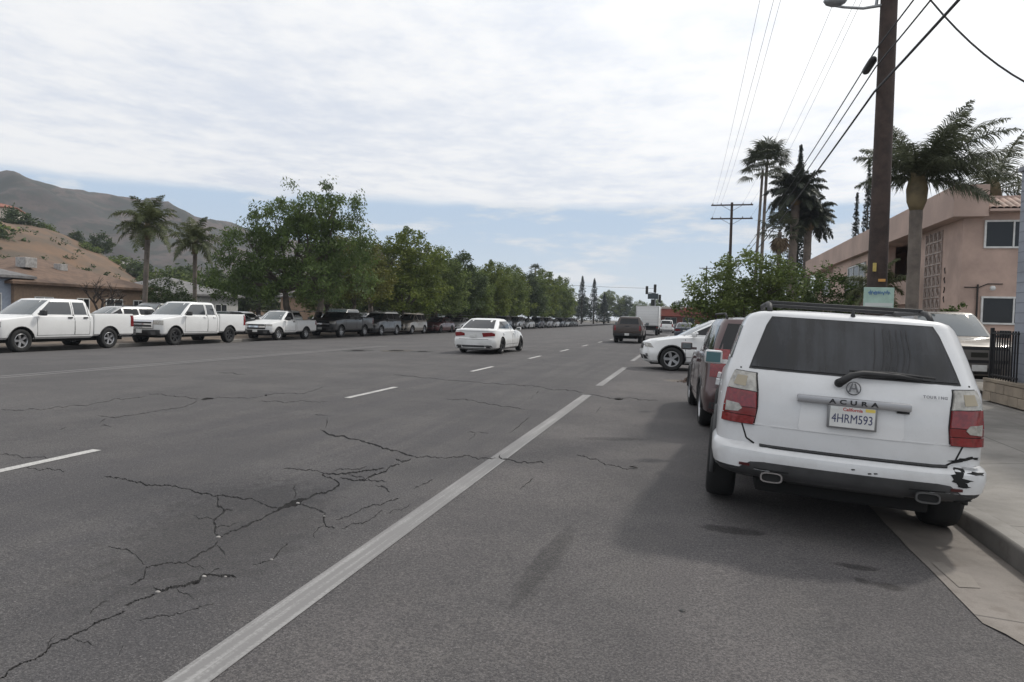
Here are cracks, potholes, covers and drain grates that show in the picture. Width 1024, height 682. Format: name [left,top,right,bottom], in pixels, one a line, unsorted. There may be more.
crack [0,387,544,679]
crack [401,375,659,431]
